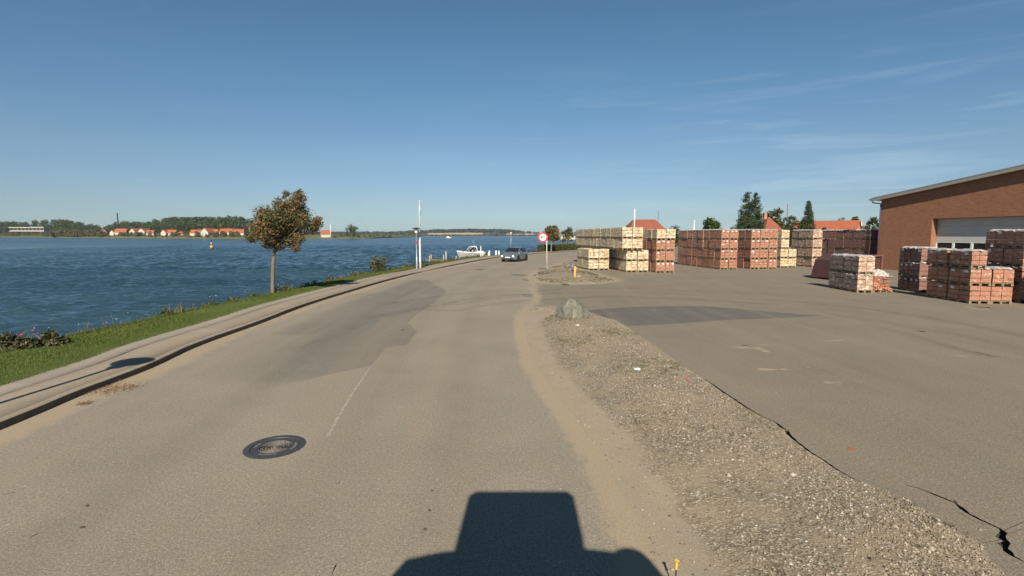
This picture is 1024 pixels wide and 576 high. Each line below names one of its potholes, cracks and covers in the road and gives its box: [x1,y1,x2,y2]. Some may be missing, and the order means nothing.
crack [705,379,861,482]
crack [908,485,1024,562]
manhole cover [242,435,306,459]
